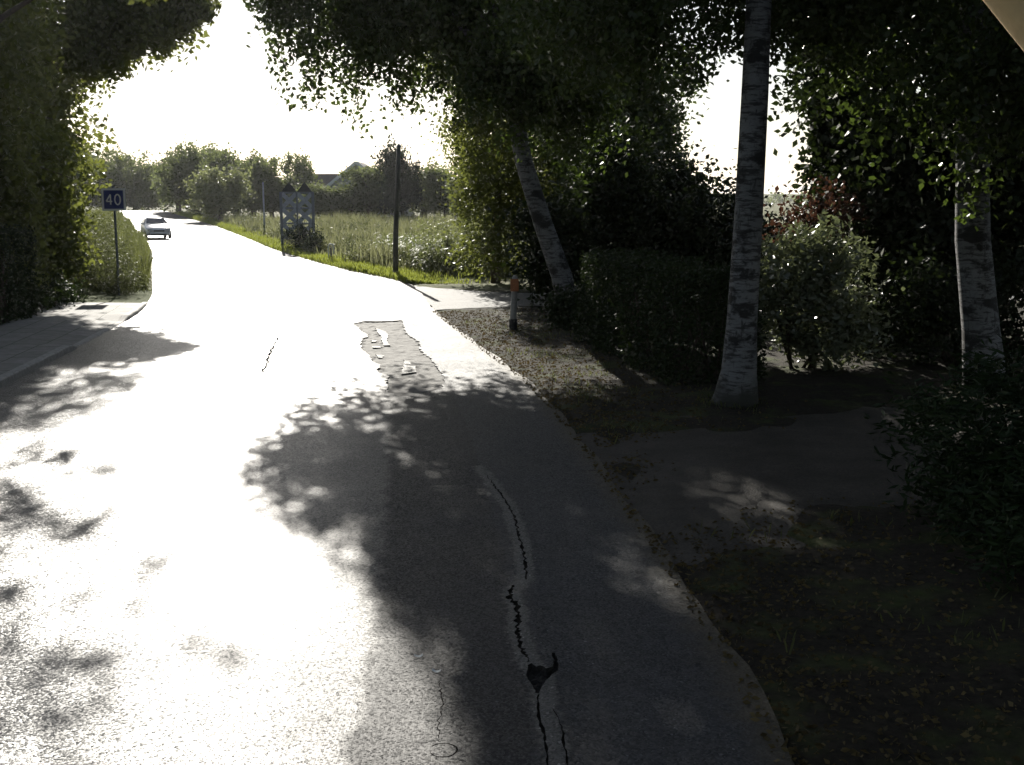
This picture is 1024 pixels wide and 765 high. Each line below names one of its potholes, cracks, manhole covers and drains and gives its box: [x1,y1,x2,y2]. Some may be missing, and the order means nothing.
crack [260,335,280,374]
crack [536,694,568,765]
crack [487,475,529,662]
crack [431,679,458,758]
pothole [526,653,559,693]
